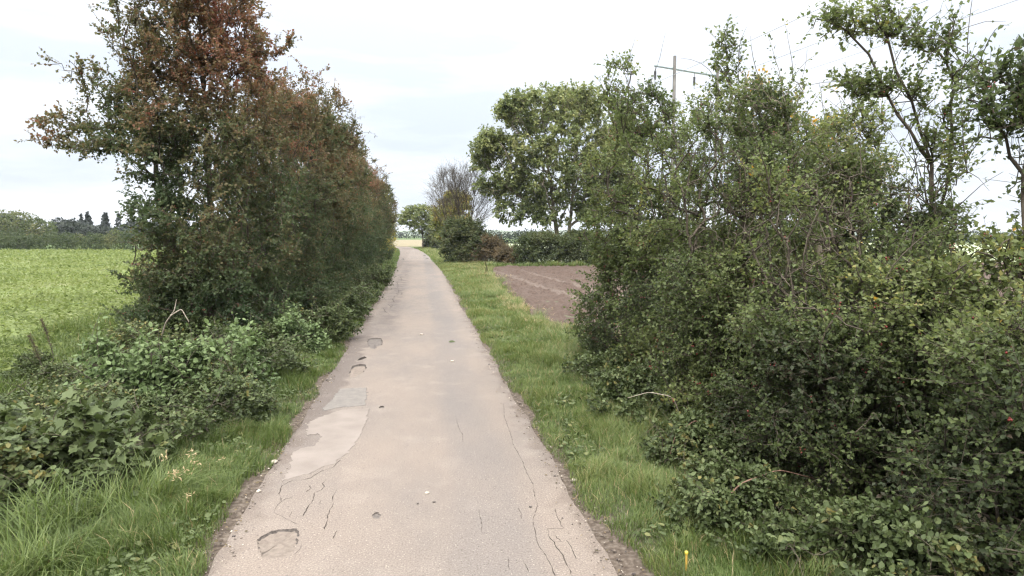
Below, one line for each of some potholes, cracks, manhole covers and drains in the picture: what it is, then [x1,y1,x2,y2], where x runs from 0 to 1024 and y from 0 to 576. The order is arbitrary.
pothole [367,338,383,349]
pothole [257,528,299,558]
crack [275,461,339,538]
crack [503,404,576,575]
pothole [349,364,367,378]
